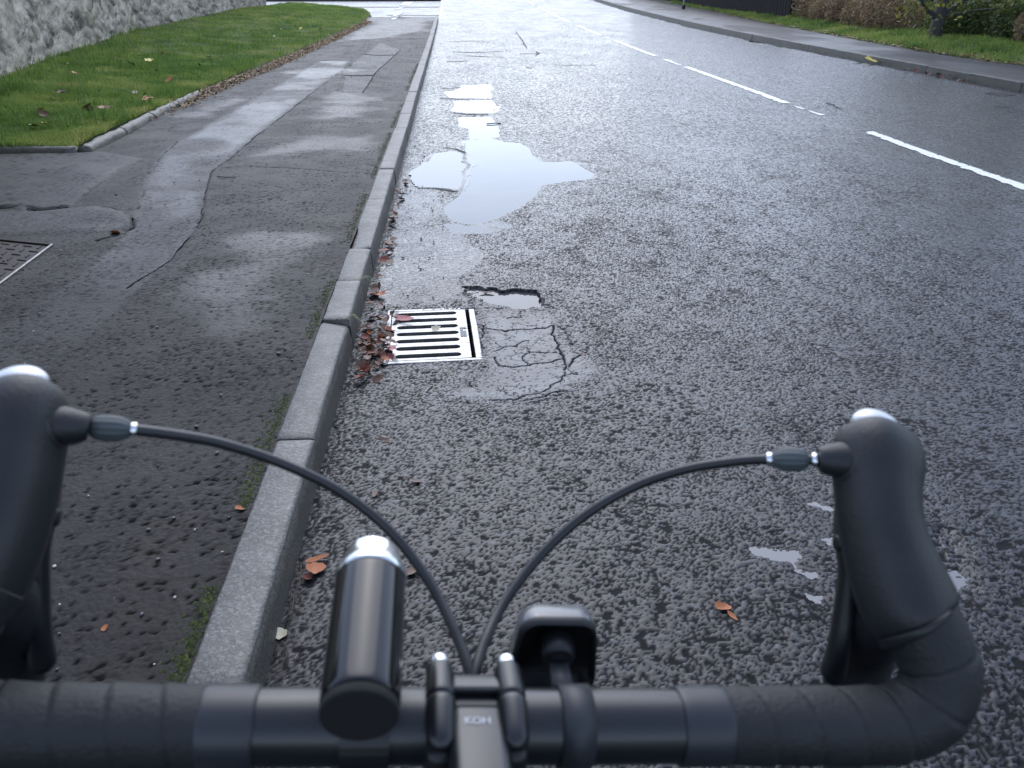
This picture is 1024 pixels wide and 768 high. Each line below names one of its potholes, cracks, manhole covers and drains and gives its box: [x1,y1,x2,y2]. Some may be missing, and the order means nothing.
crack [480,316,581,401]
utility cover [0,239,53,285]
crack [126,170,213,289]
pothole [456,284,550,312]
crack [96,143,175,242]
drain grate [383,308,482,365]
